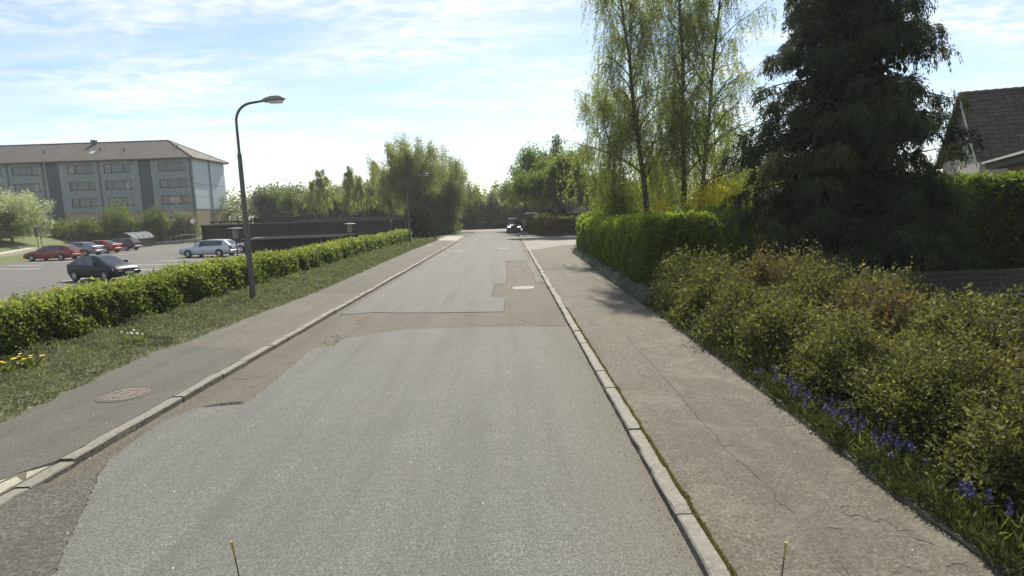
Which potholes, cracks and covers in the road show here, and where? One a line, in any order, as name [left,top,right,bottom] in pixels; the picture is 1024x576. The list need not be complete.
crack [830,506,970,573]
manhole cover [94,386,154,403]
crack [626,337,796,515]
crack [320,316,368,345]
